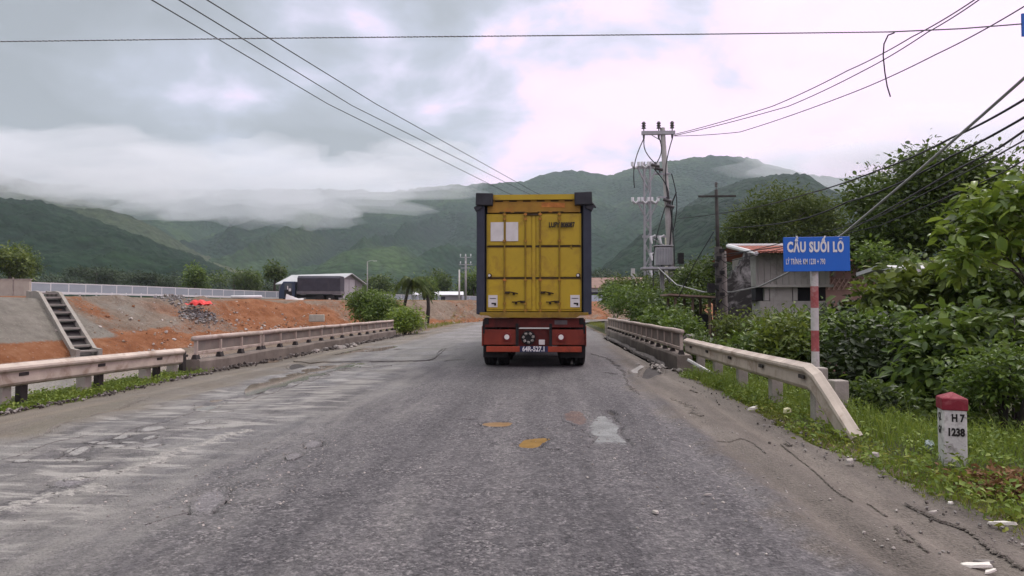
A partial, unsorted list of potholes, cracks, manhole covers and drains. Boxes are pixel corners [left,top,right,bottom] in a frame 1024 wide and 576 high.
crack [718,438,1024,570]
pothole [304,439,322,449]
crack [237,348,465,403]
crack [591,336,665,395]
pothole [285,451,303,461]
